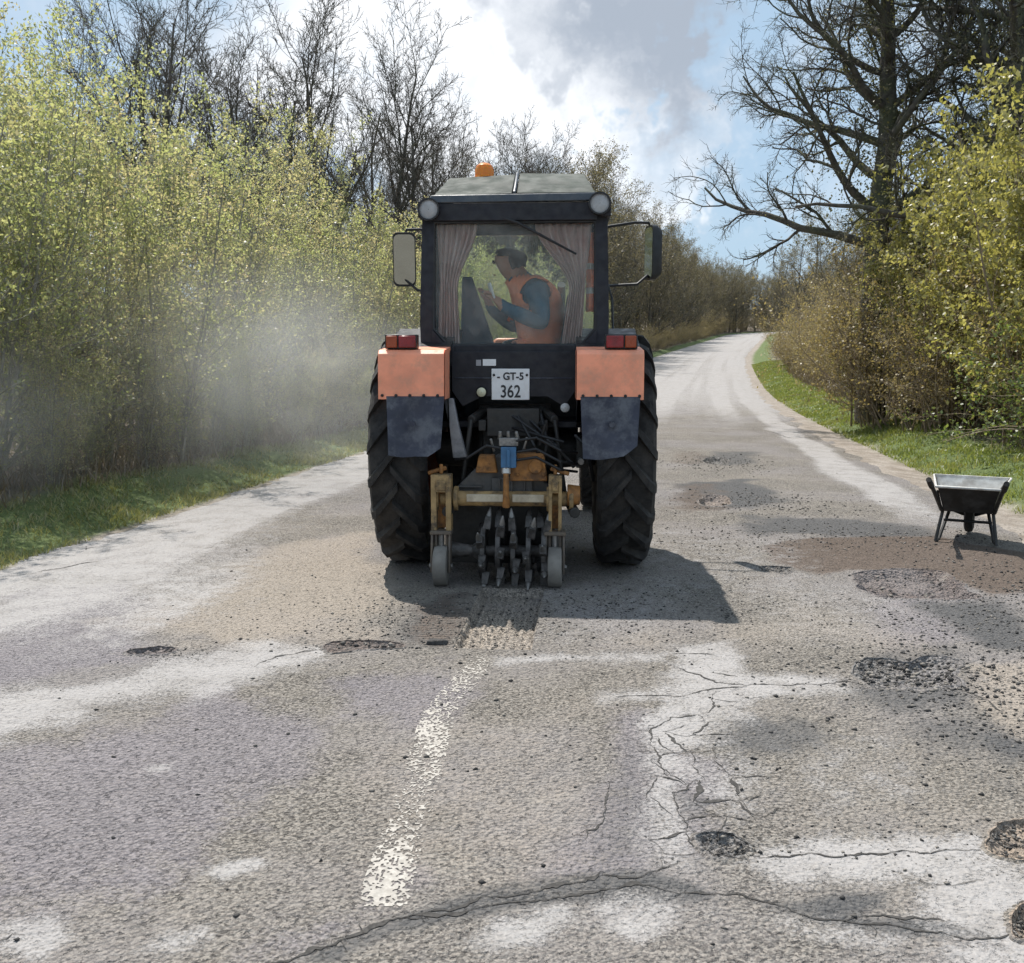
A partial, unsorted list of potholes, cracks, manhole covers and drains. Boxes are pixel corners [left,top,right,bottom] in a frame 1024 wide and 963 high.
pothole [701,457,731,465]
crack [271,858,1014,963]
crack [743,849,983,860]
pothole [320,639,408,655]
pothole [696,495,732,507]
crack [616,653,855,856]
pothole [980,818,1024,864]
pothole [1002,900,1024,945]
pothole [122,645,180,657]
pothole [690,830,757,863]
pothole [850,568,983,602]
pothole [847,655,967,693]
